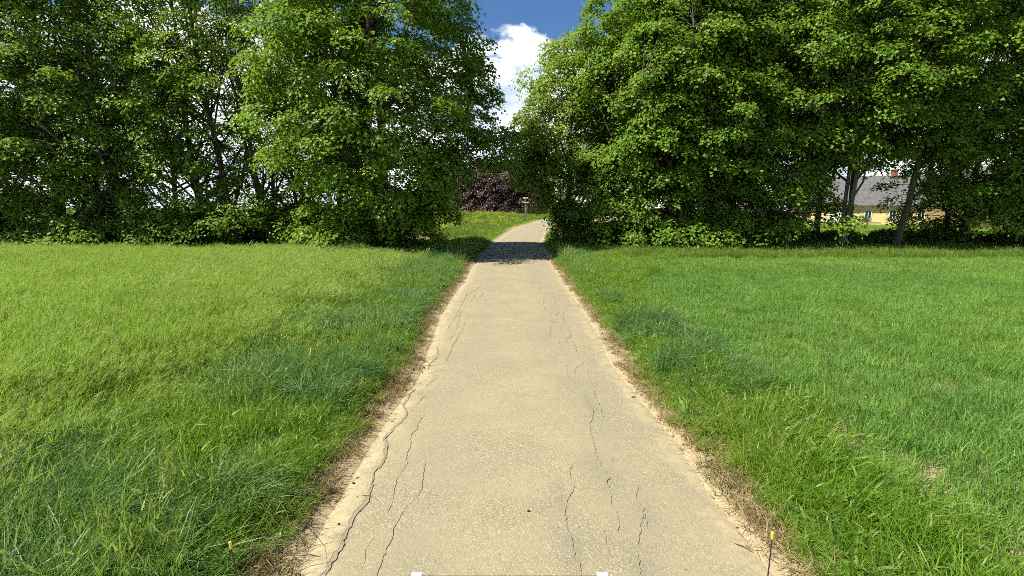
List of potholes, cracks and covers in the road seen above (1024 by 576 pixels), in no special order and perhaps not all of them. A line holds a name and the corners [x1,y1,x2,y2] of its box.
crack [320,287,484,576]
crack [540,281,663,576]
